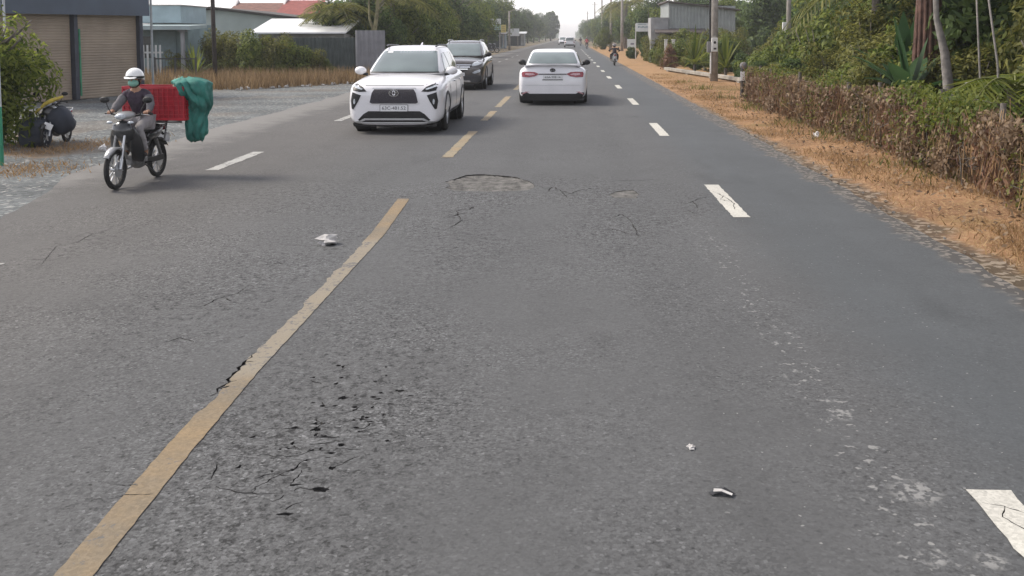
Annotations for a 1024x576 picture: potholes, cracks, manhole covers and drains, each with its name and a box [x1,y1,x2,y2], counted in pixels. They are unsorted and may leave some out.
pothole [446,174,535,192]
crack [211,365,414,516]
crack [168,263,289,342]
pothole [609,190,639,199]
crack [211,354,253,396]
